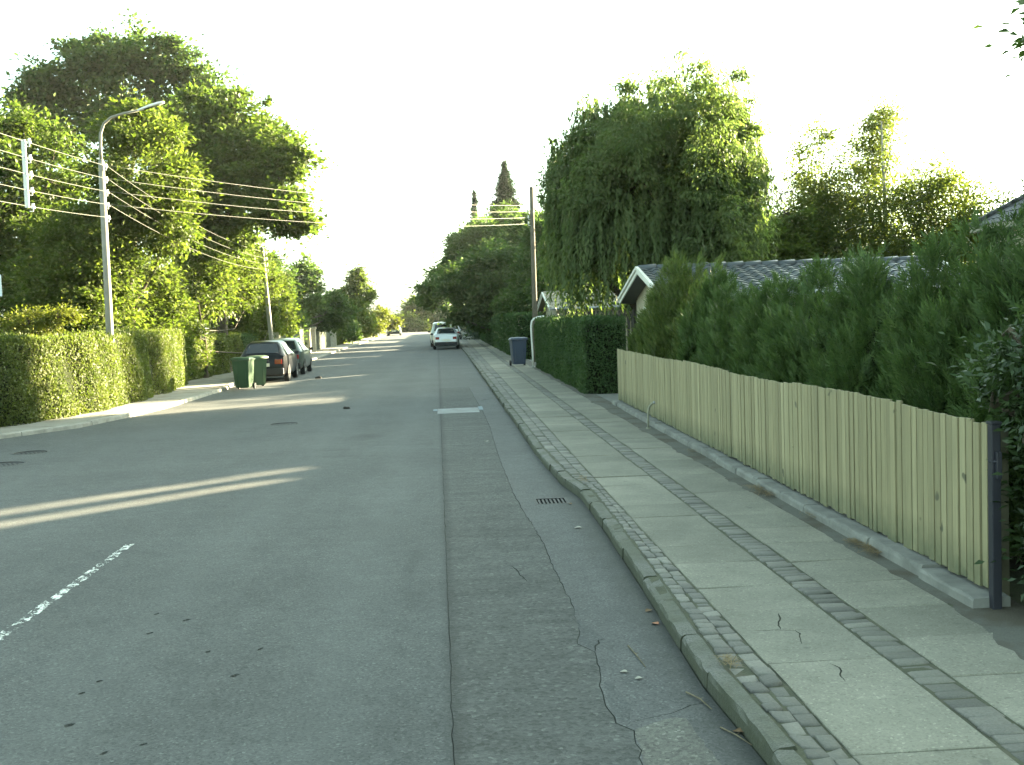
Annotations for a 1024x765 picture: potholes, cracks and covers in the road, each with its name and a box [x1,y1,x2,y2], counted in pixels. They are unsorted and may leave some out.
crack [469,388,708,765]
drain grate [533,497,570,505]
